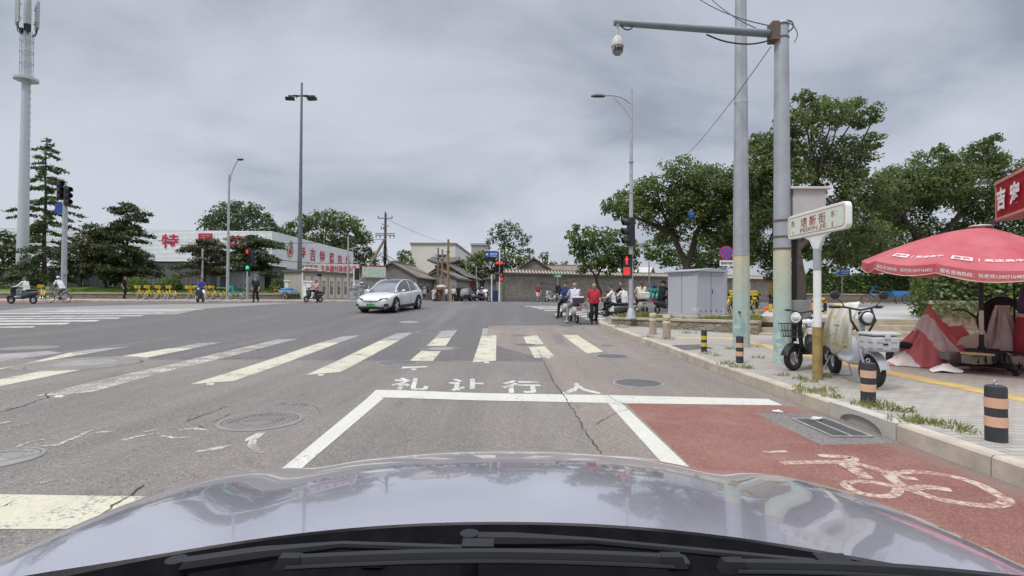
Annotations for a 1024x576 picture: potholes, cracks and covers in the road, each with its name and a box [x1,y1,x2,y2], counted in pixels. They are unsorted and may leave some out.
manhole cover [215,411,304,432]
manhole cover [612,379,665,388]
manhole cover [46,358,123,367]
crack [0,484,144,514]
drain grate [791,418,874,437]
manhole cover [0,447,47,467]
